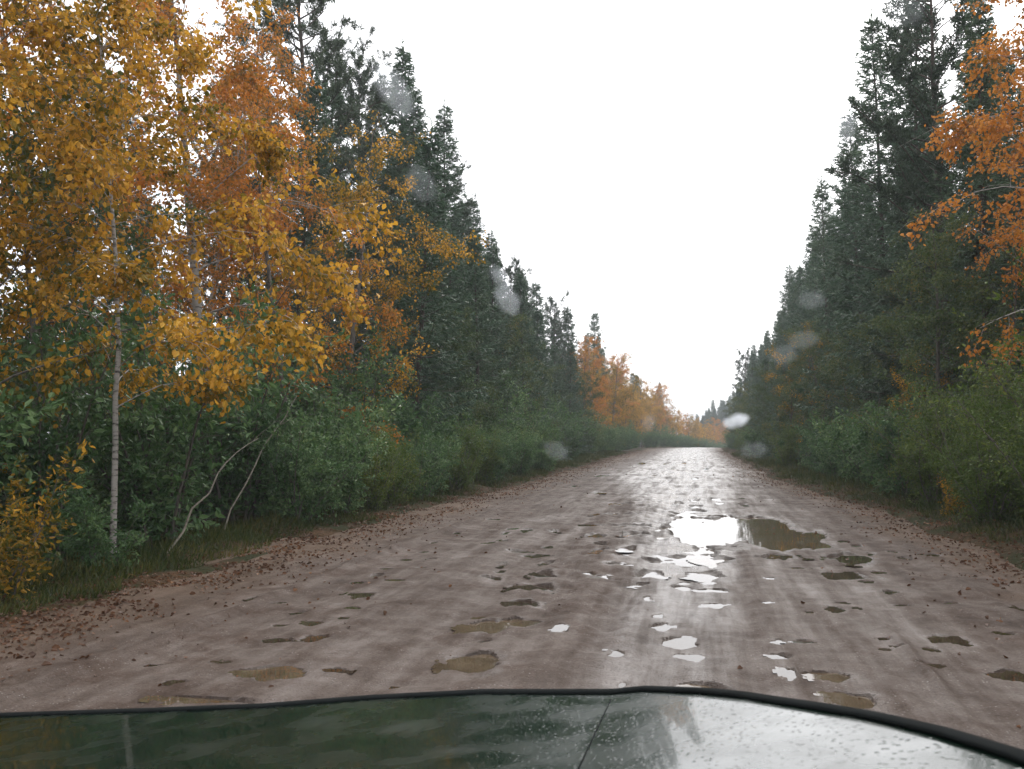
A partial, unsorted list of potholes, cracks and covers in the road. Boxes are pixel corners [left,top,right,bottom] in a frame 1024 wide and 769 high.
pothole [450,616,543,634]
pothole [662,636,699,650]
pothole [500,582,557,594]
pothole [653,512,834,569]
pothole [431,650,500,673]
pothole [813,691,877,709]
pothole [227,665,307,681]
pothole [801,670,853,683]
pothole [927,633,974,647]
pothole [820,571,881,580]
pothole [984,668,1024,682]
pothole [820,551,875,567]
